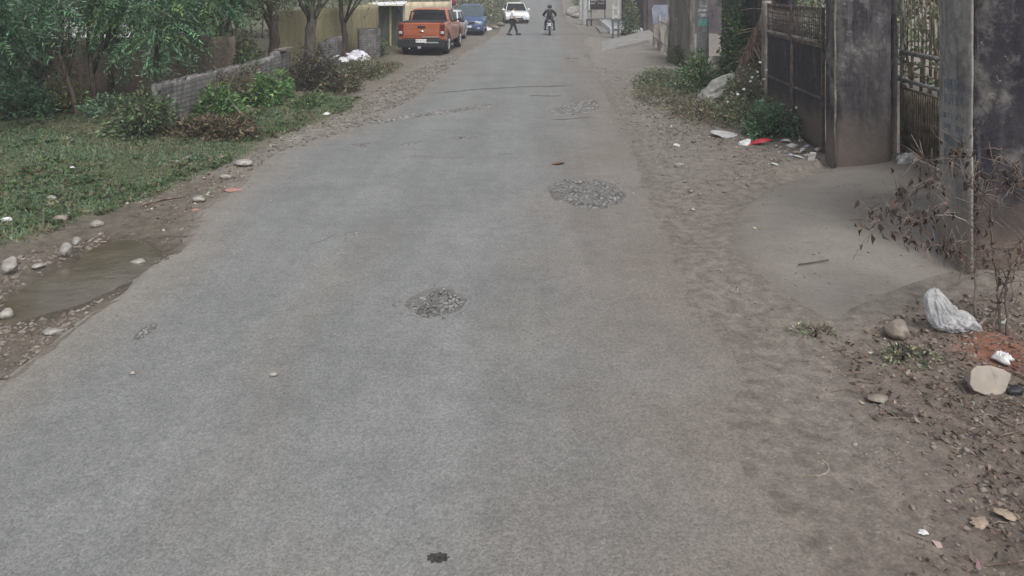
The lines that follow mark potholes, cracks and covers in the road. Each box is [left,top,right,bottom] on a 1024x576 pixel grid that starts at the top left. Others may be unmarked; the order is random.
pothole [404,287,467,318]
pothole [547,177,627,209]
crack [440,86,556,96]
pothole [133,322,158,340]
pothole [427,552,450,563]
pothole [547,98,600,115]
